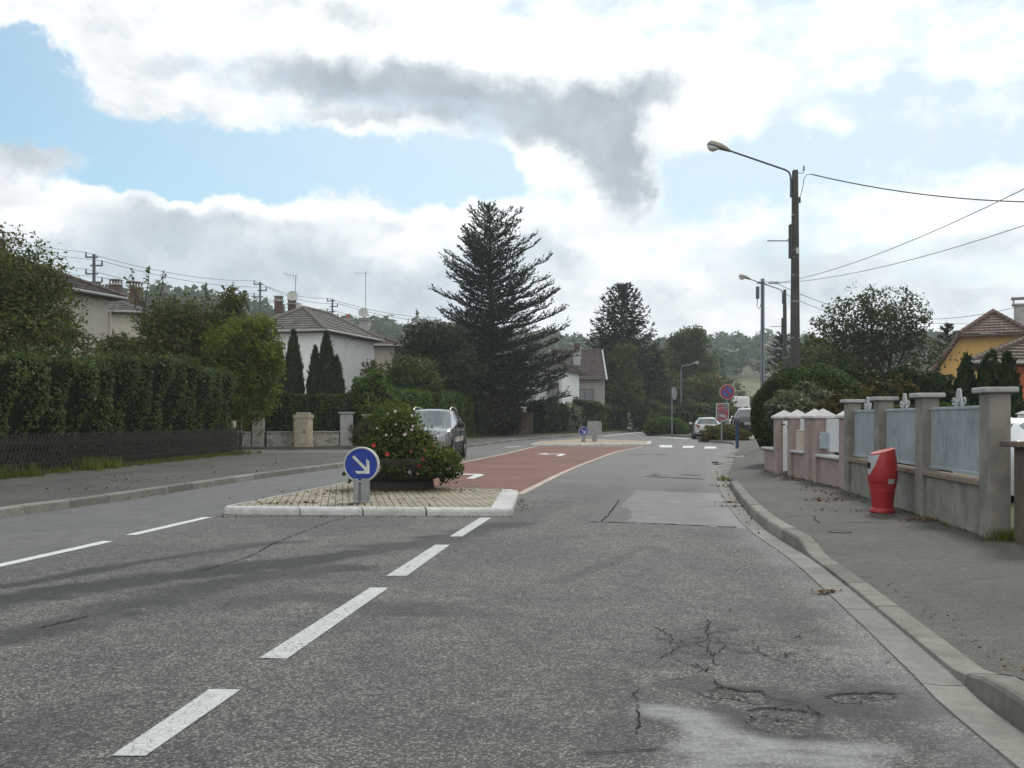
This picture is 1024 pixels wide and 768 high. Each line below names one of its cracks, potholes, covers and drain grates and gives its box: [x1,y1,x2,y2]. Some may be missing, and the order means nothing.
pothole [821,692,897,704]
crack [200,515,352,571]
crack [590,501,732,535]
crack [642,619,918,716]
pothole [744,706,823,739]
crack [588,683,667,753]
